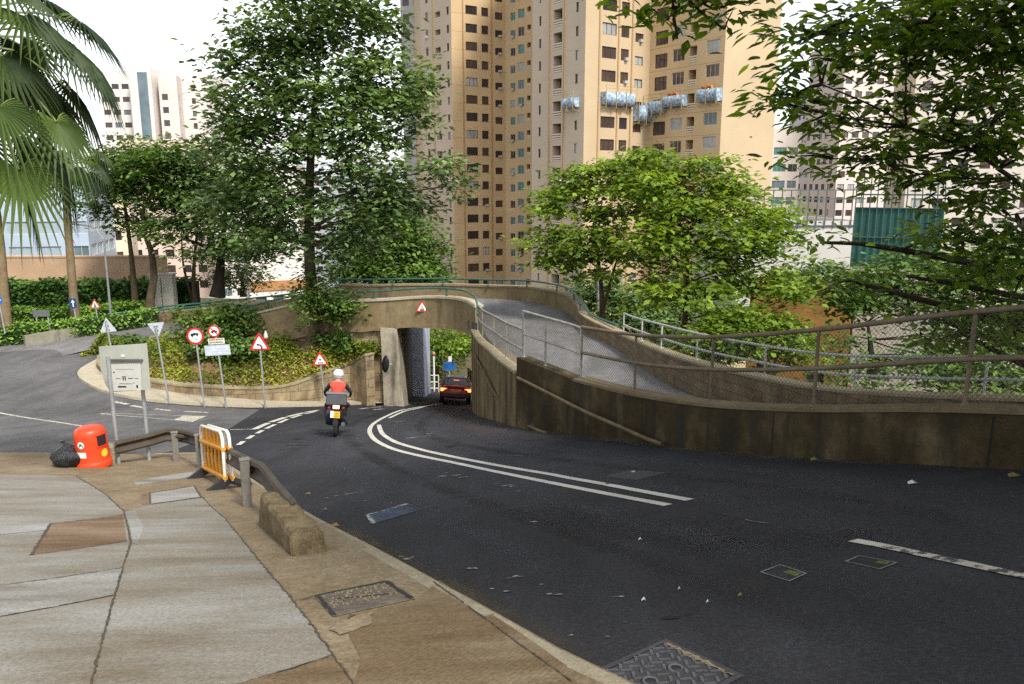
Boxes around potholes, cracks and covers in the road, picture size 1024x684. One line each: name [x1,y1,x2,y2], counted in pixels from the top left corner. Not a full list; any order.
manhole cover [845,555,898,569]
manhole cover [601,639,744,684]
manhole cover [760,564,807,581]
manhole cover [314,580,416,617]
